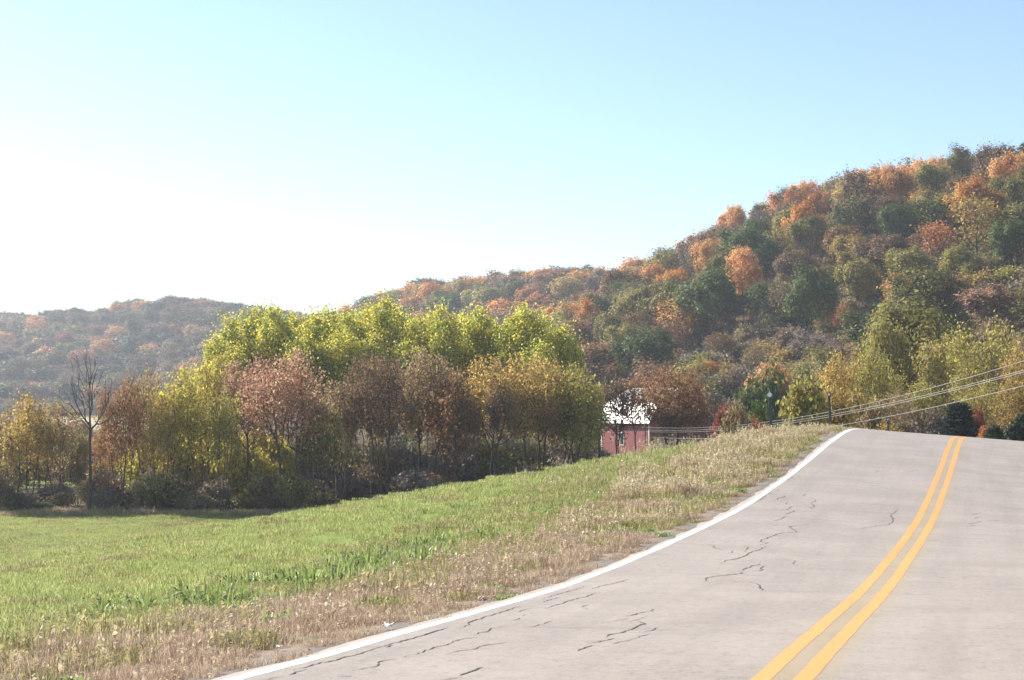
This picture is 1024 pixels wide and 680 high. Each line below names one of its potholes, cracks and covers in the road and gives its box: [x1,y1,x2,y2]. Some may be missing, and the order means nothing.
crack [262,579,627,680]
crack [705,478,816,590]
crack [578,609,655,650]
